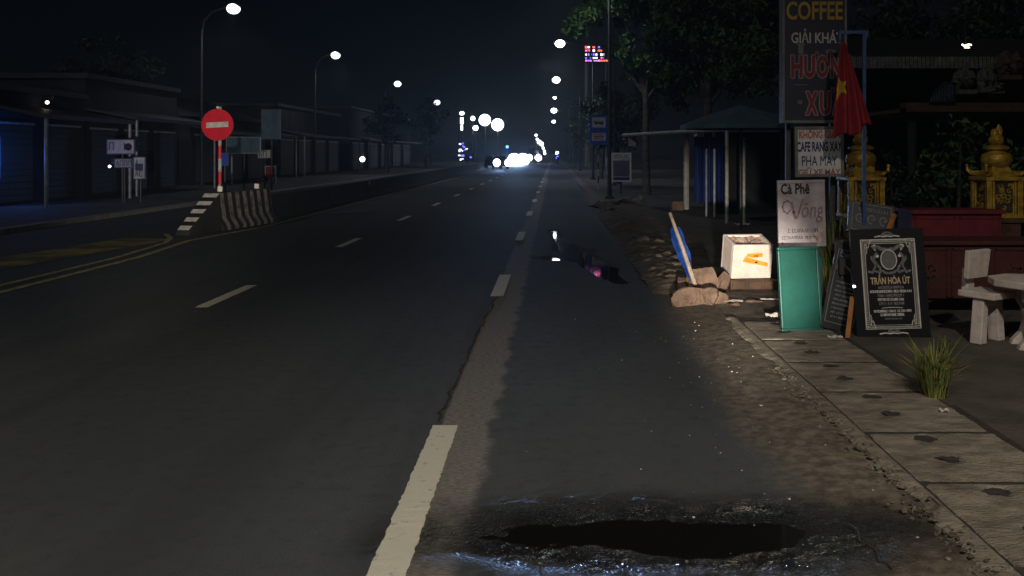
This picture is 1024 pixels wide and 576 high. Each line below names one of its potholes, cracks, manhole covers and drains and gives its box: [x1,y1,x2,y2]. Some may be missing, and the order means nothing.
crack [848,522,893,569]
